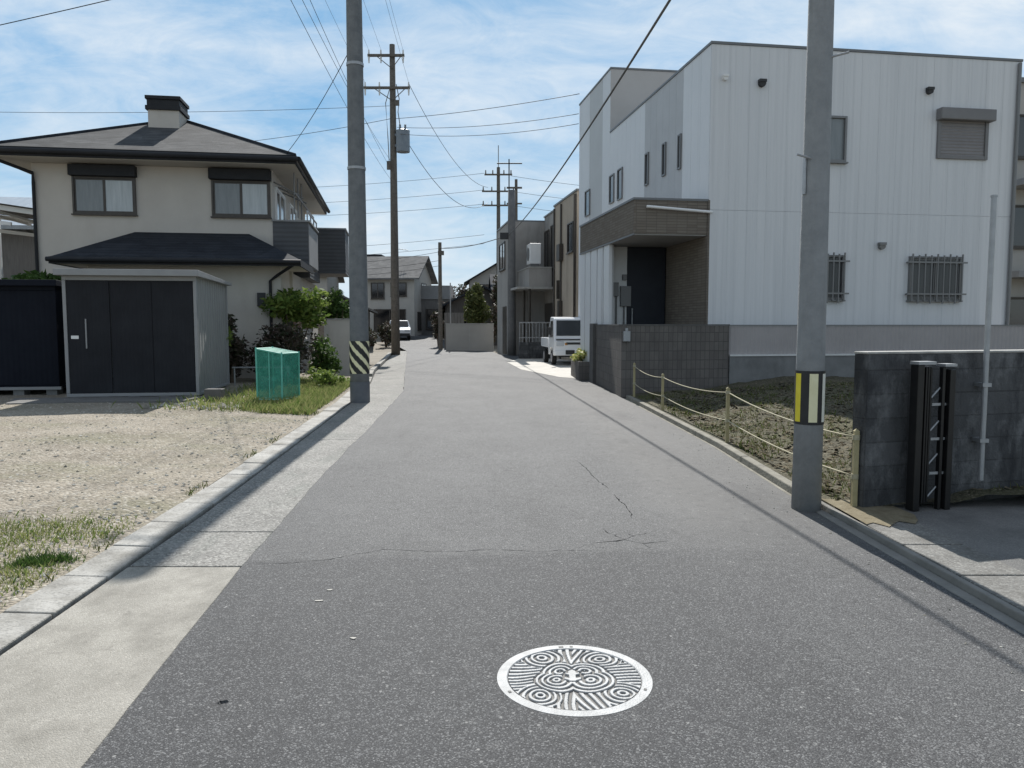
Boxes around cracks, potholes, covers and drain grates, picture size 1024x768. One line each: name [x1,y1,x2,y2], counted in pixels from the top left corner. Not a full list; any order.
manhole cover [497,645,653,717]
crack [579,463,664,550]
